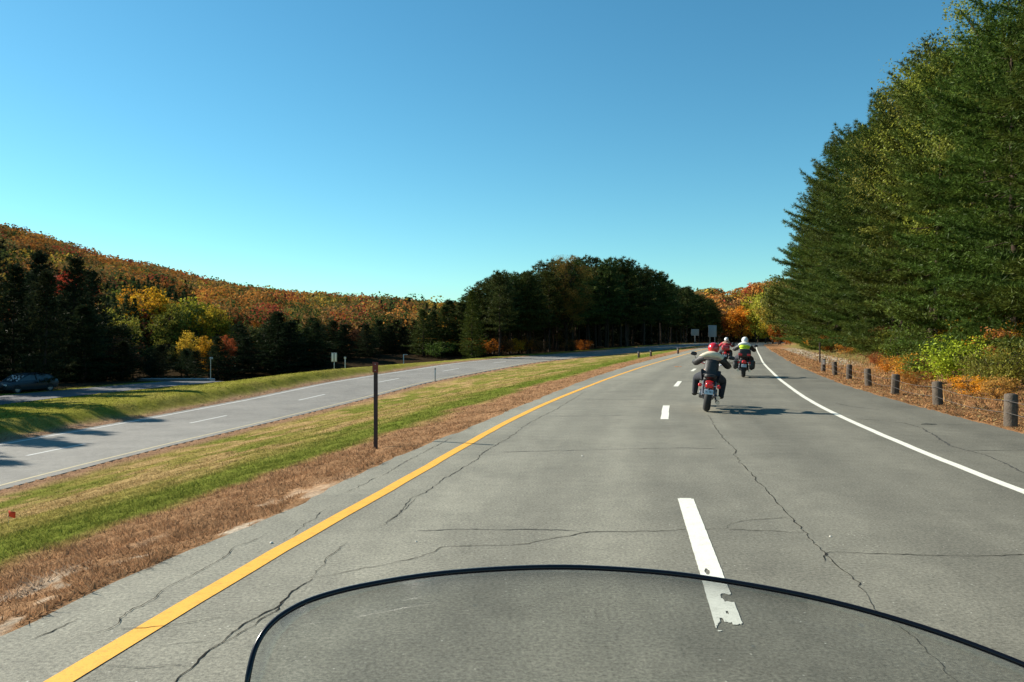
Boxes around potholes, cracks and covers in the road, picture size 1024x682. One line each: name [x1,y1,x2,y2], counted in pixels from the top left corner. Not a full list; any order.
crack [65,418,1021,682]
crack [379,395,579,527]
